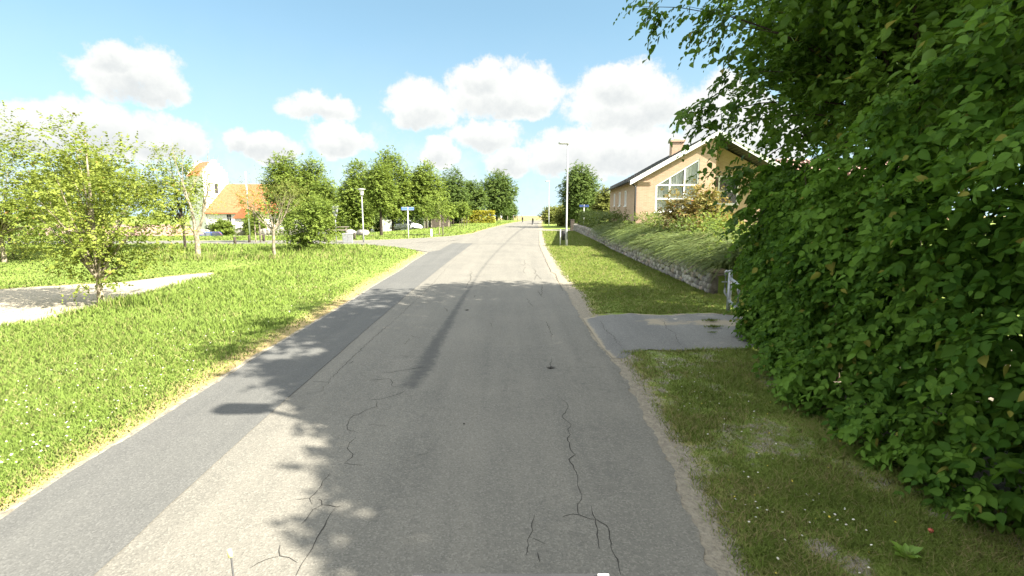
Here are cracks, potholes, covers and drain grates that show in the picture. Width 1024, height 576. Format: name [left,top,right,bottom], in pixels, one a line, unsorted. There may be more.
crack [562,404,621,575]
crack [345,367,421,465]
crack [250,473,343,575]
